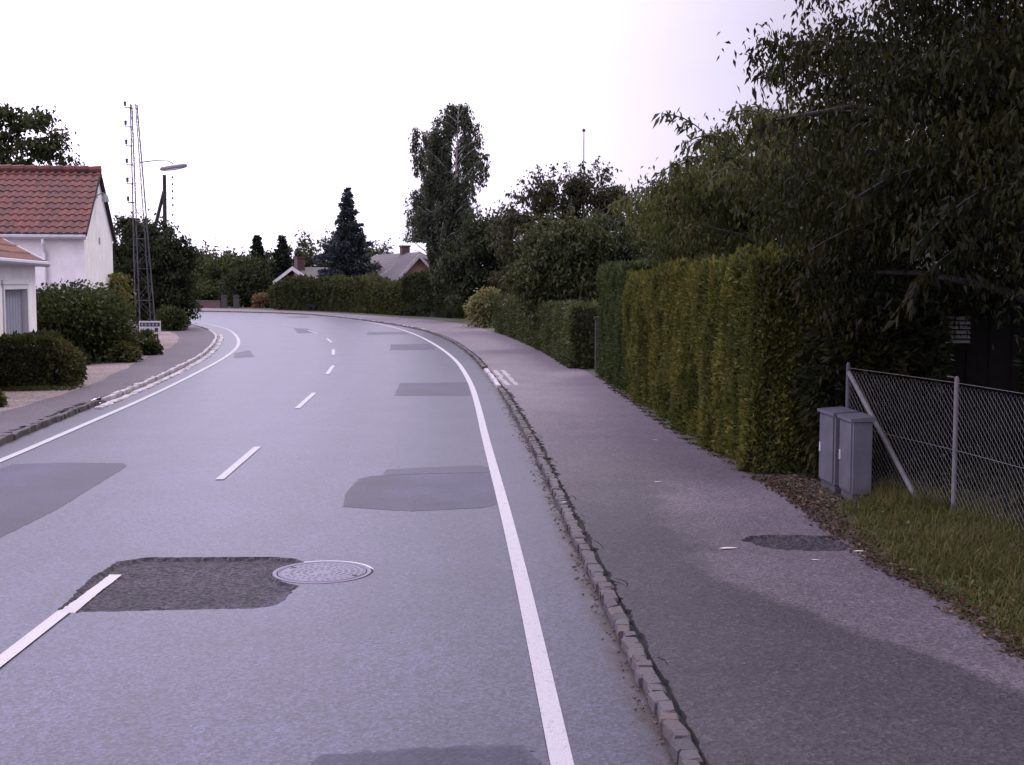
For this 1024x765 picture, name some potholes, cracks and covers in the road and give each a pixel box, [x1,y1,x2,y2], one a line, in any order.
manhole cover [269,561,374,584]
